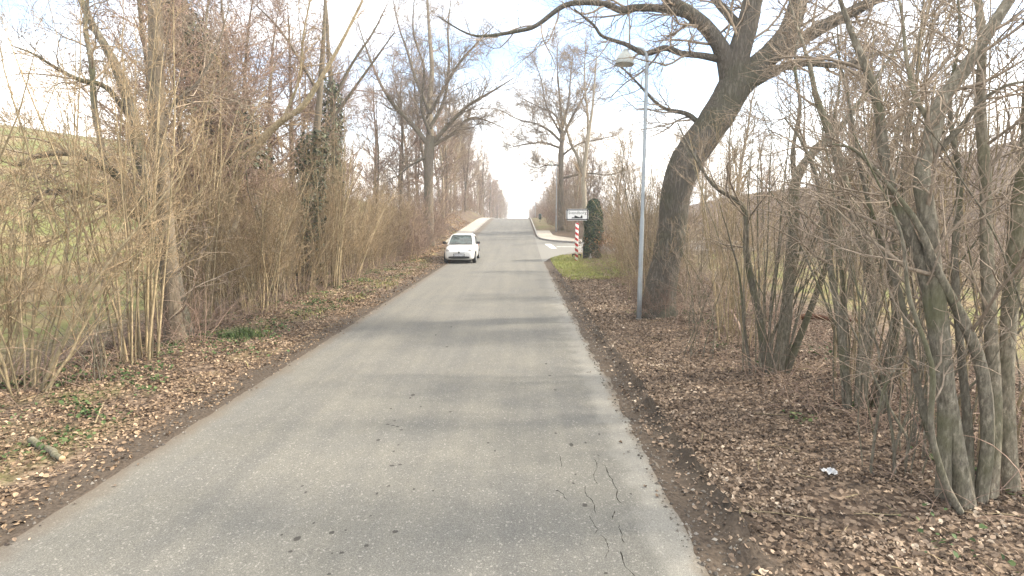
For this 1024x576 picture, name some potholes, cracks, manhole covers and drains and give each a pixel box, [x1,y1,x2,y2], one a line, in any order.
crack [585,455,635,576]
